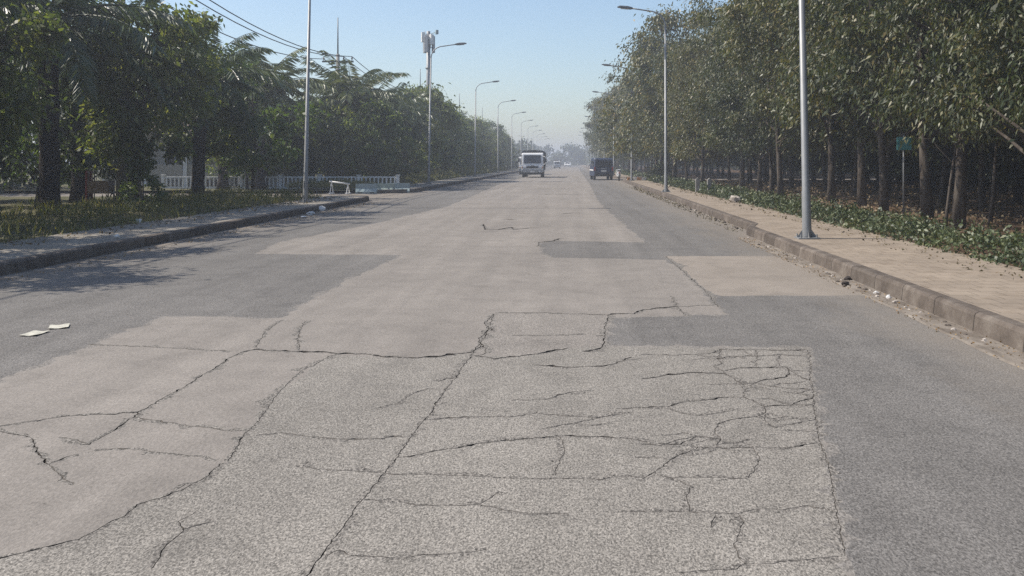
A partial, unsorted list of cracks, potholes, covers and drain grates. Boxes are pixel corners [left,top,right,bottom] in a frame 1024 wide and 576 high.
crack [0,296,845,576]
crack [482,219,560,246]
